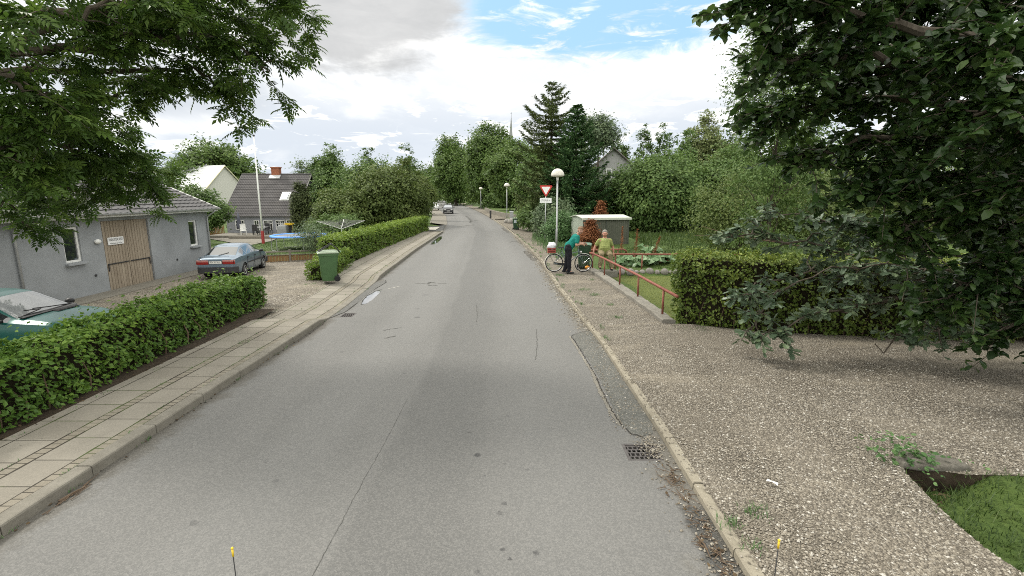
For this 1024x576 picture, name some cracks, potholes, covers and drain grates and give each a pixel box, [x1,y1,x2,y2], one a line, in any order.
drain grate [622,444,664,461]
